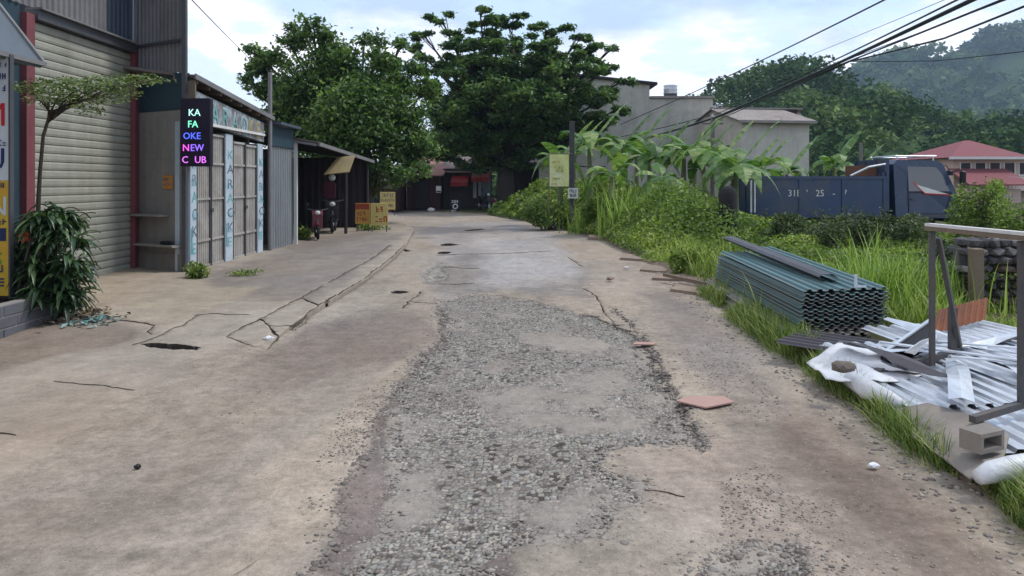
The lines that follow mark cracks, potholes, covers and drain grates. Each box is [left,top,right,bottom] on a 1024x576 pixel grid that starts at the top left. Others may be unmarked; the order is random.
crack [107,245,807,576]
crack [54,381,134,390]
